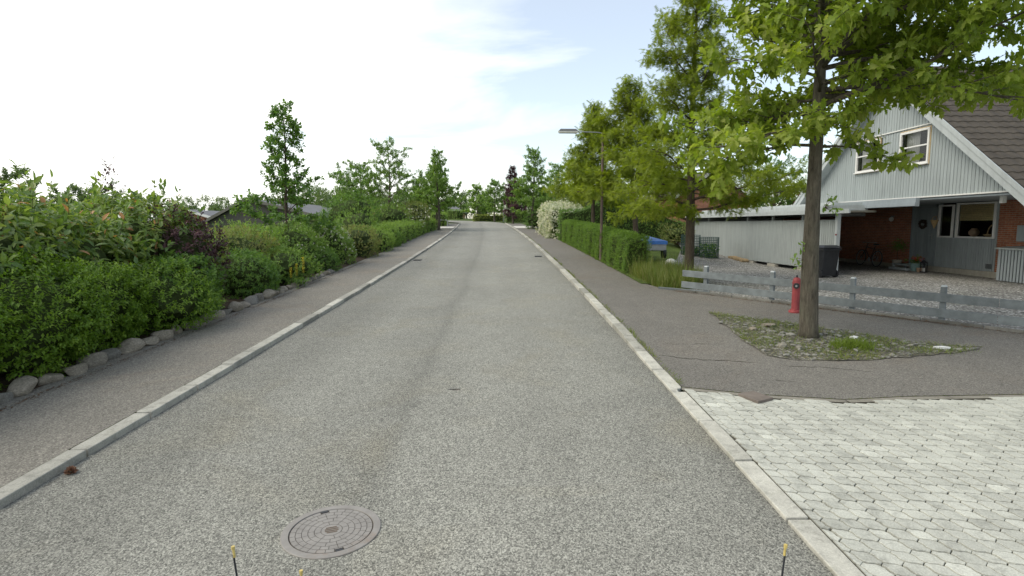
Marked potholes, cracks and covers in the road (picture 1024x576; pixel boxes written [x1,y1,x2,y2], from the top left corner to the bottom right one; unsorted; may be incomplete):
manhole cover [280,505,381,560]
